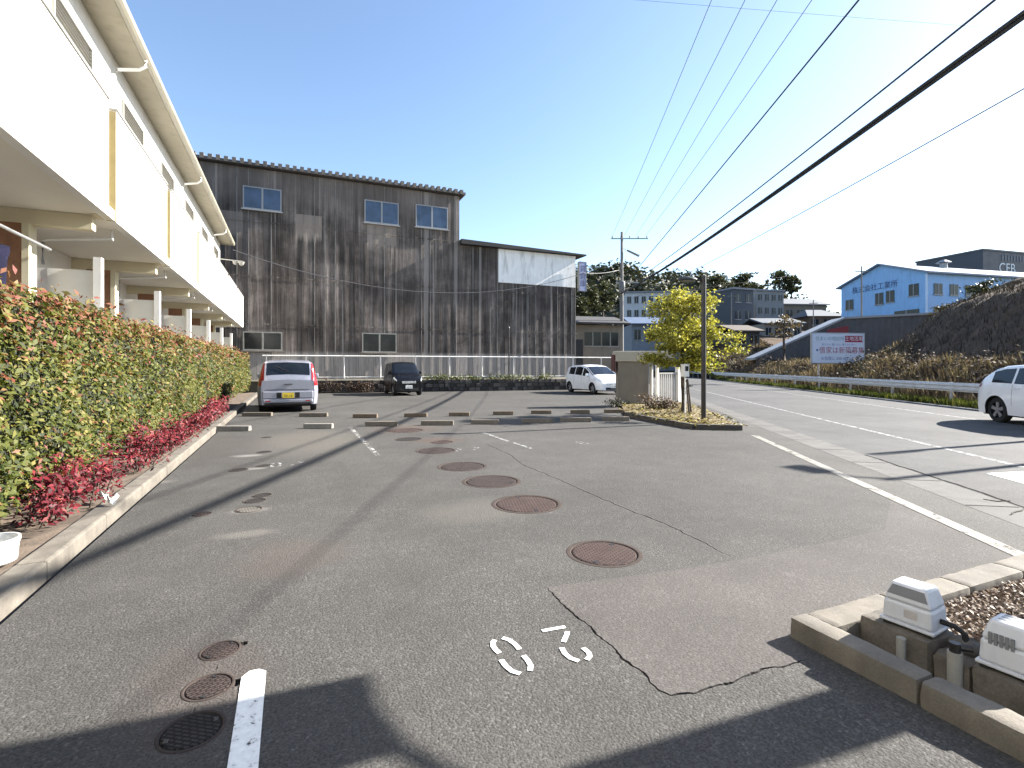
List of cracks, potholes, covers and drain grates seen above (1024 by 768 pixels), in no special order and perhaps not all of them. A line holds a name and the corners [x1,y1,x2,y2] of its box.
manhole cover [154,710,227,754]
manhole cover [198,640,241,661]
manhole cover [566,540,643,568]
crack [548,589,806,696]
manhole cover [180,672,235,702]
manhole cover [491,495,562,514]
manhole cover [462,475,521,488]
manhole cover [437,462,487,471]
crack [489,445,725,554]
